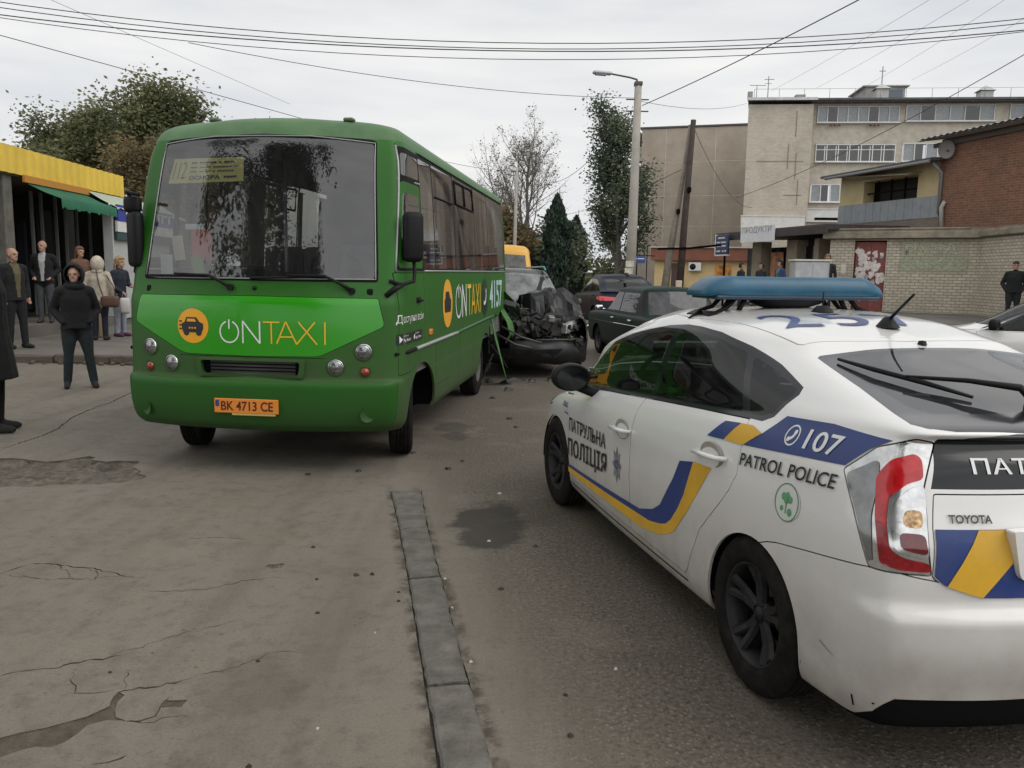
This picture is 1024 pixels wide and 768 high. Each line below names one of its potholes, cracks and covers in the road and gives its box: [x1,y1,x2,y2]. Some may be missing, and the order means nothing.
crack [1,563,143,580]
crack [0,392,131,450]
crack [0,619,292,765]
